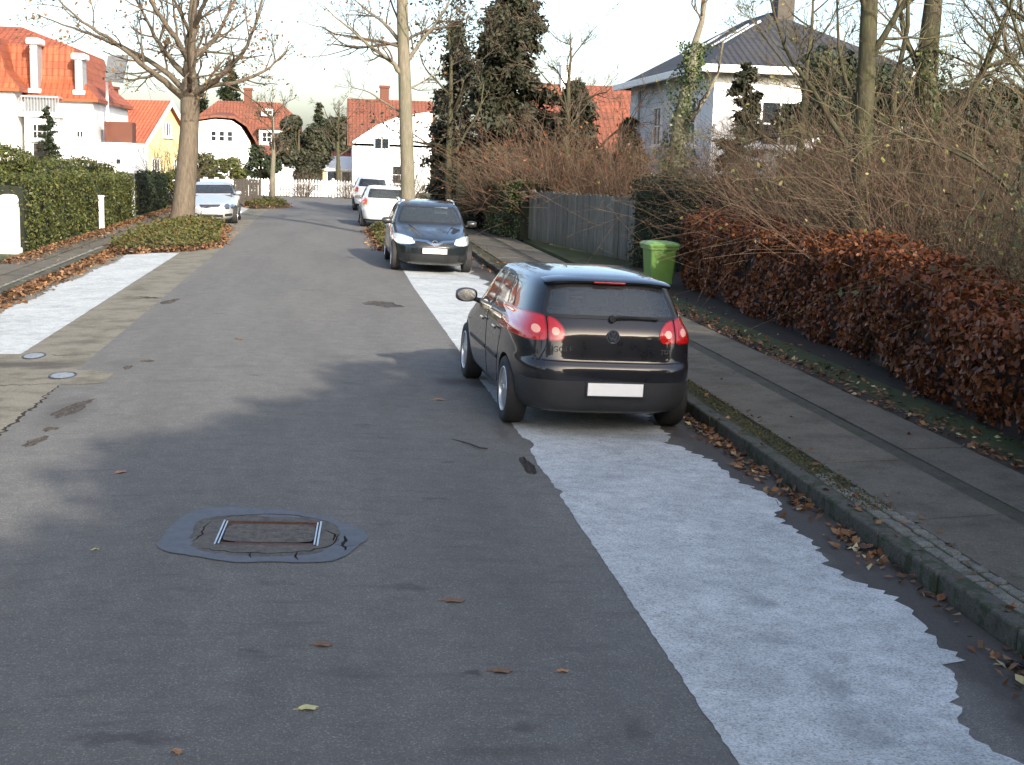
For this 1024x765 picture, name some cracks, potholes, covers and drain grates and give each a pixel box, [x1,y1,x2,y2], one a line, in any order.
crack [0,384,59,436]
manhole cover [214,520,322,546]
pothole [519,456,537,475]
